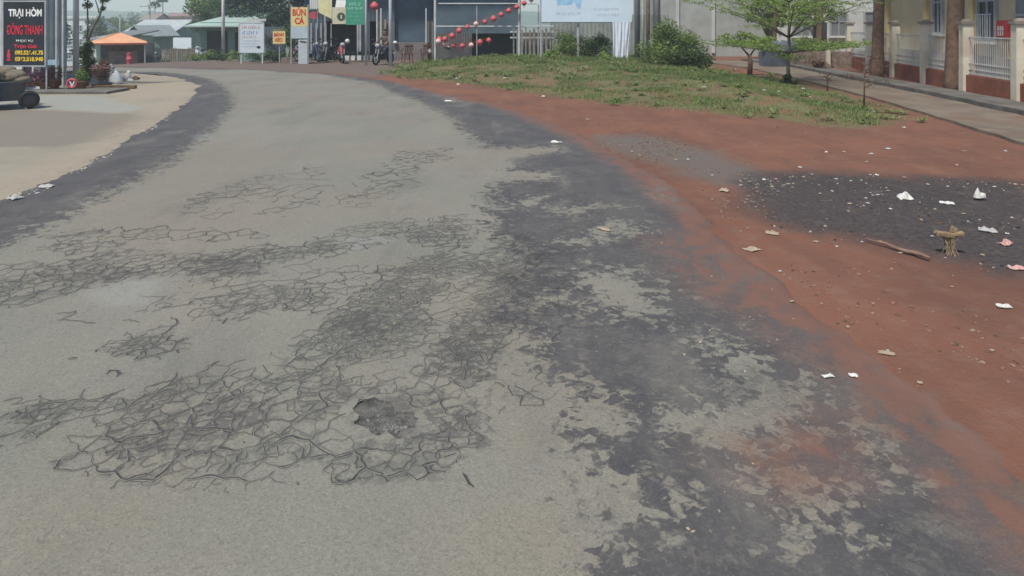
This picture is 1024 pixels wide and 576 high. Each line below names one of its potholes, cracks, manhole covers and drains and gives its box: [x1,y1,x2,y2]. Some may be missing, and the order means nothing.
crack [0,148,598,493]
pothole [338,392,438,448]
